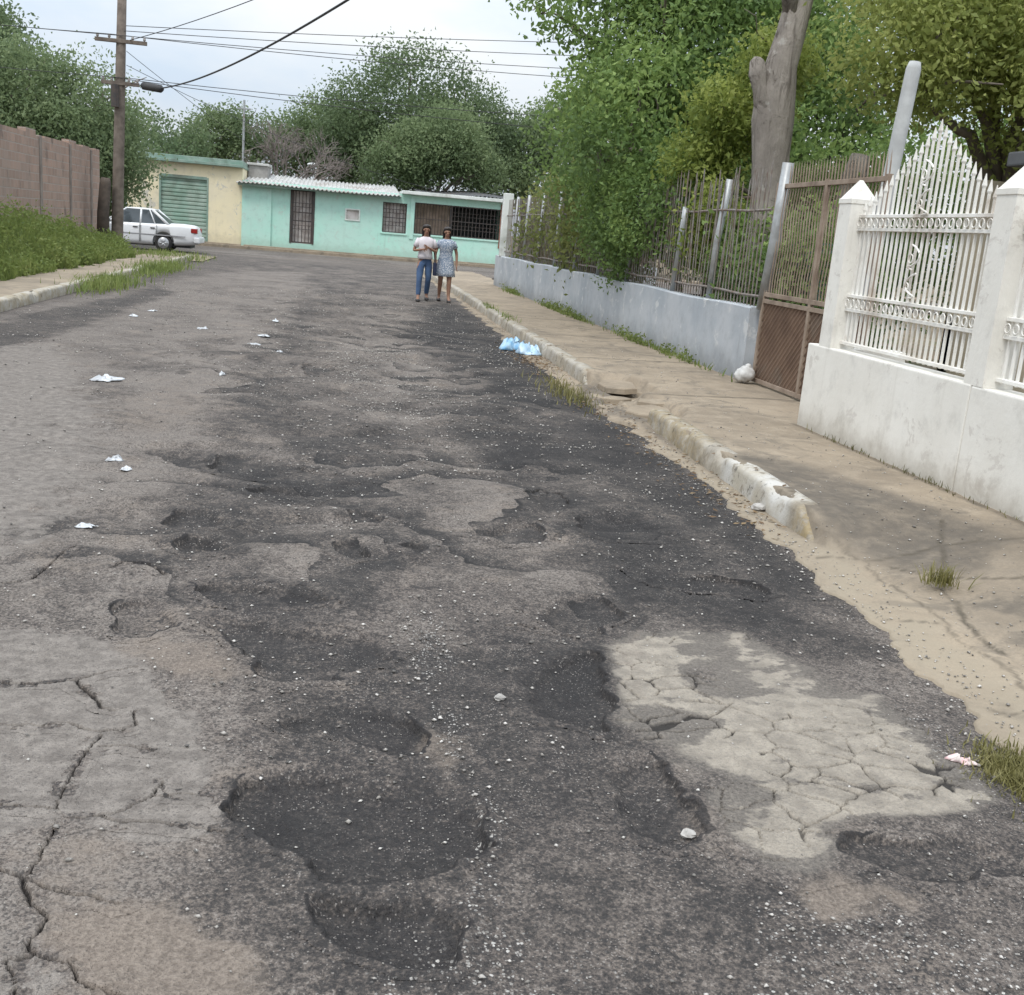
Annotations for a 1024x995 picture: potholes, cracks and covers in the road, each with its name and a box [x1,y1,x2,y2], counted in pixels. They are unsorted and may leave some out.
pothole [513,588,634,640]
pothole [249,685,445,760]
pothole [586,745,726,858]
pothole [209,737,519,894]
pothole [827,823,1024,896]
crack [582,623,1024,892]
pothole [91,593,198,643]
pothole [449,518,560,549]
pothole [610,561,785,602]
pothole [284,876,495,984]
pothole [318,532,389,565]
crack [0,662,241,995]
